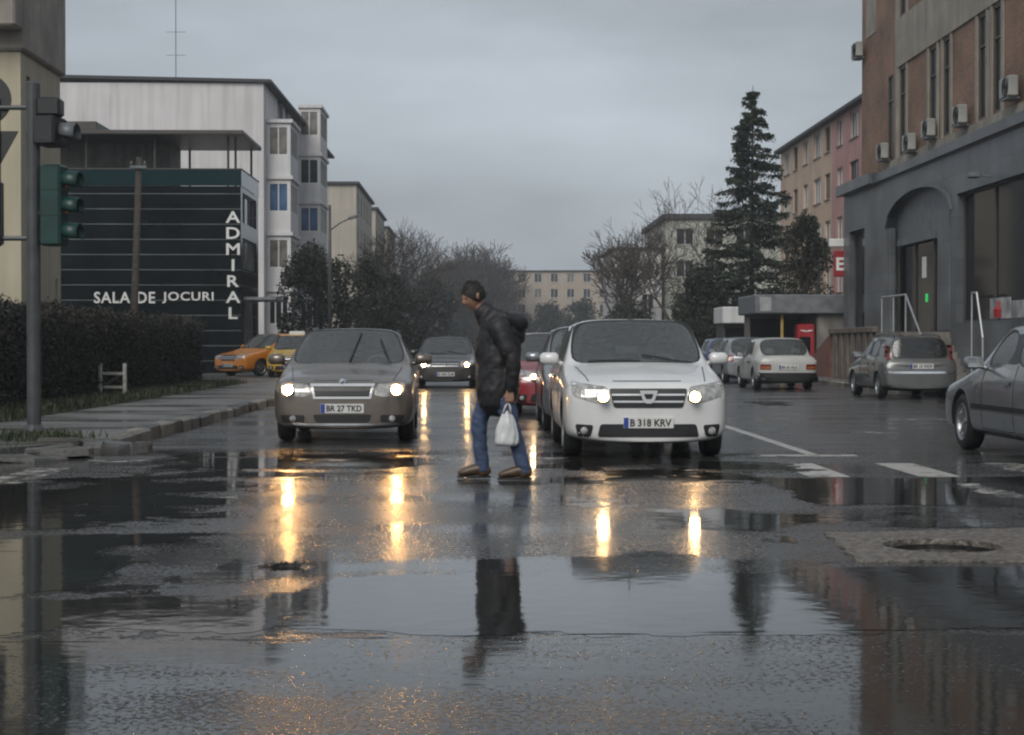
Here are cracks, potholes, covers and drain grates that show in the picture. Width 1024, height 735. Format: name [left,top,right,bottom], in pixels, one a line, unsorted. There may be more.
pothole [258,560,305,571]
manhole cover [824,528,1024,563]
